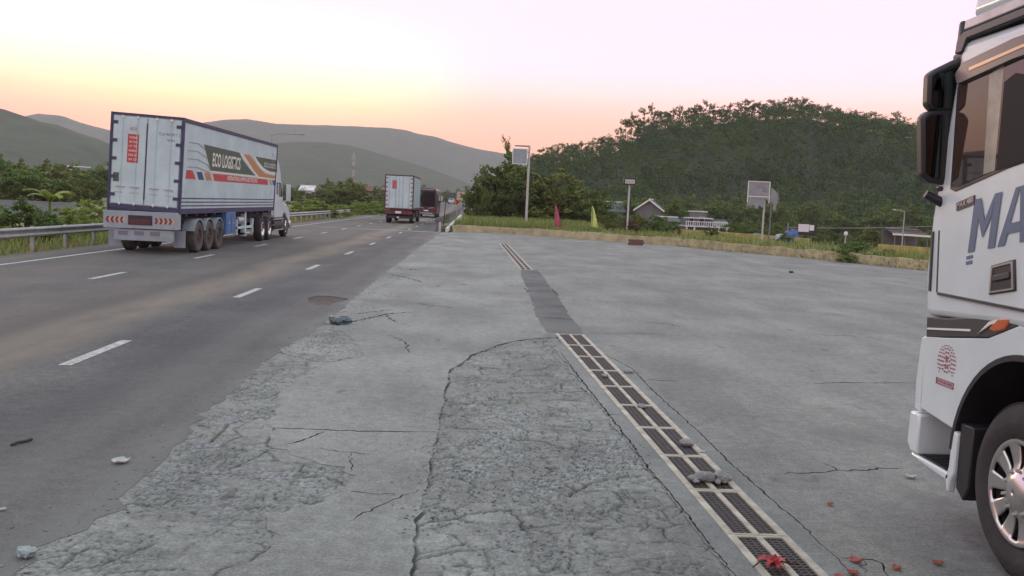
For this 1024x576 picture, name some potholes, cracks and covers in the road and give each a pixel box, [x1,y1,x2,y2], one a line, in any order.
drain grate [727,534,829,576]
drain grate [600,385,656,406]
drain grate [688,489,788,536]
drain grate [575,356,621,371]
crack [13,302,898,576]
drain grate [616,404,679,428]
drain grate [659,455,742,491]
drain grate [635,426,707,456]
drain grate [565,344,607,357]
drain grate [555,333,594,345]
drain grate [586,369,637,387]
